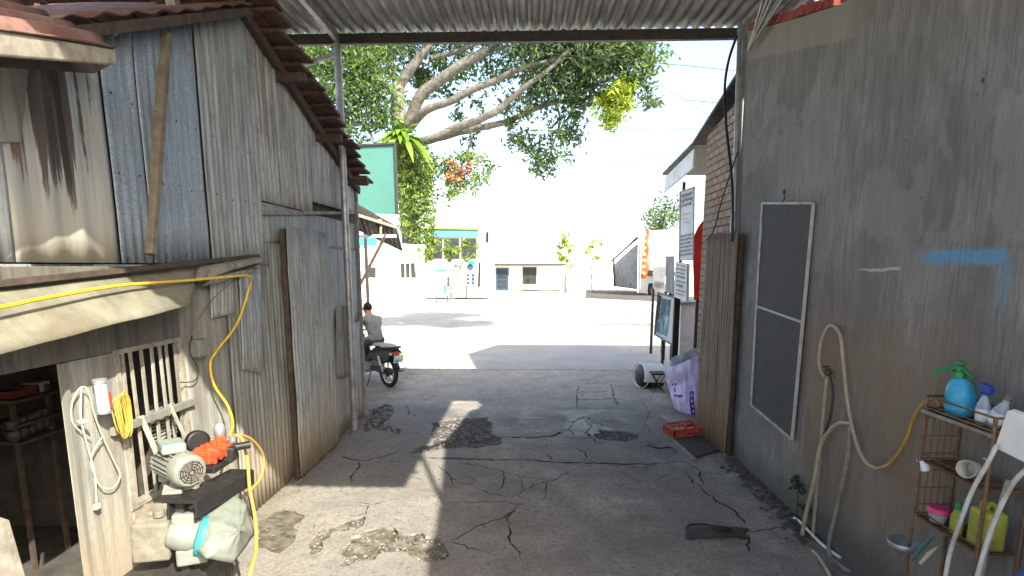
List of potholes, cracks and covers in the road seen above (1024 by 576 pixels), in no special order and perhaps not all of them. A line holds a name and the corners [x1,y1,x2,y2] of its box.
pothole [593,429,639,442]
pothole [257,510,305,553]
pothole [410,417,503,453]
pothole [362,403,402,434]
crack [439,404,778,559]
pothole [336,527,450,567]
pothole [307,516,366,555]
crack [338,450,419,482]
